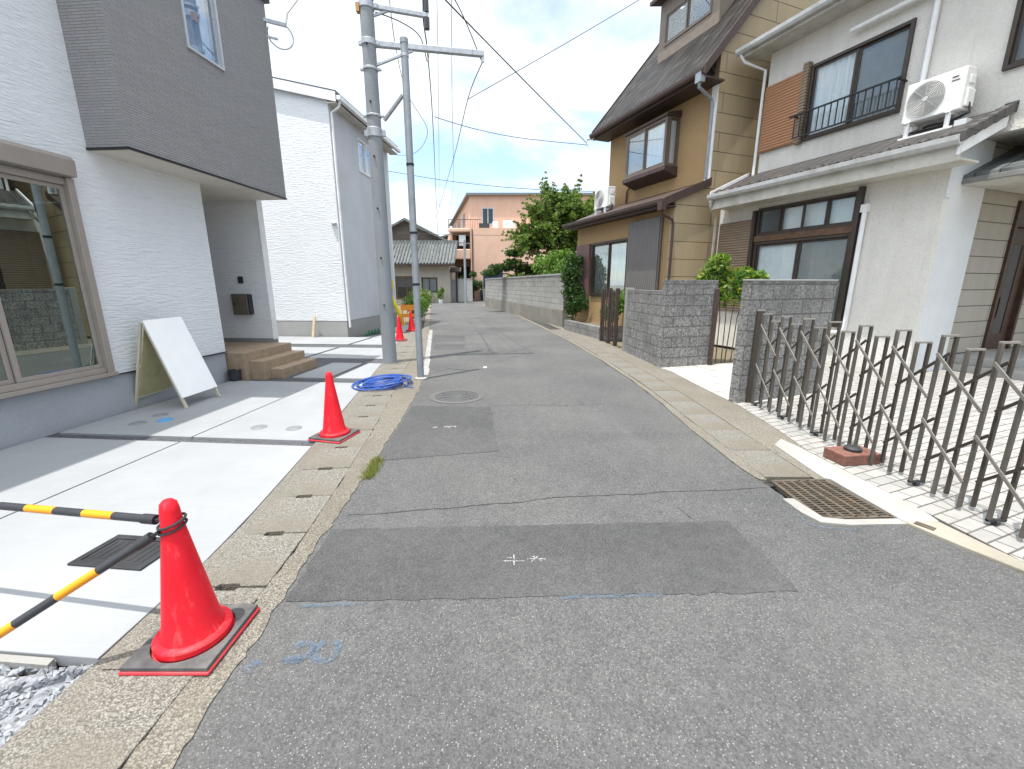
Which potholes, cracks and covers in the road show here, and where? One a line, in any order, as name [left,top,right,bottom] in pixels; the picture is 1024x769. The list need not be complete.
manhole cover [429,389,484,404]
drain grate [771,479,893,519]
crack [349,487,765,518]
